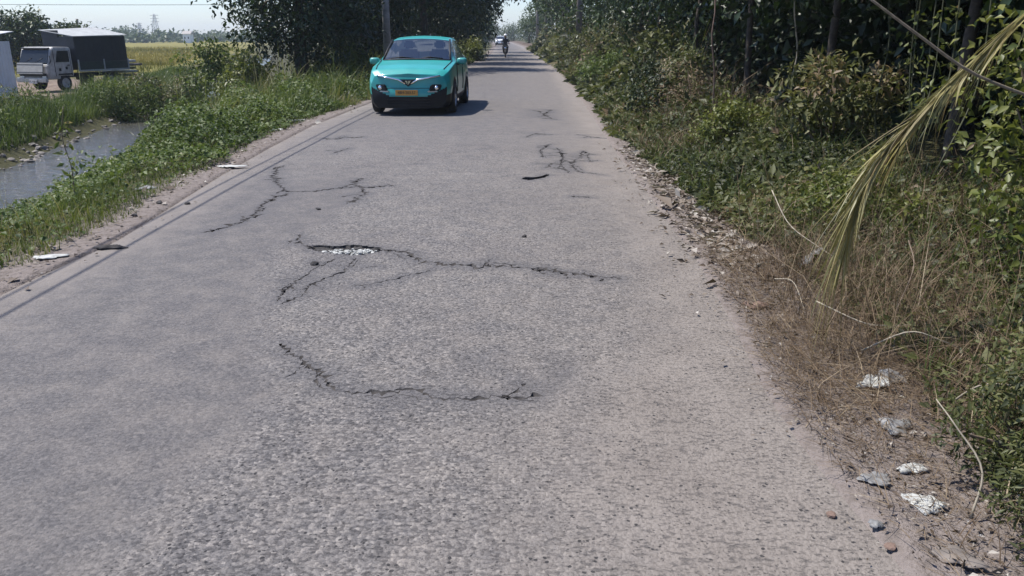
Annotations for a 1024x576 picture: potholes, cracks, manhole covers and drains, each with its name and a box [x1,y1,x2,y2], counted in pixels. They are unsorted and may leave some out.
crack [279,345,542,402]
crack [201,165,393,233]
crack [526,110,607,174]
crack [276,234,622,304]
pothole [308,245,383,255]
